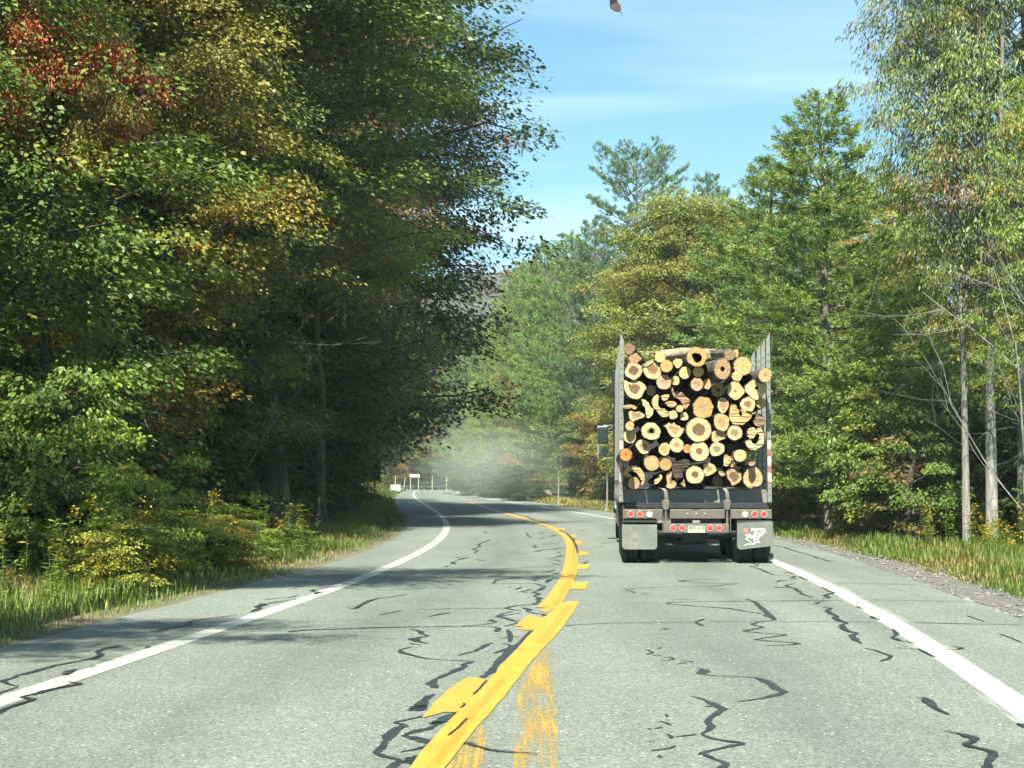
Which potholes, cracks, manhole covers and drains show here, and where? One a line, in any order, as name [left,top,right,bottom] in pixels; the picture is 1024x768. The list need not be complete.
crack [866,647,936,661]
crack [647,714,676,757]
crack [626,563,808,600]
crack [480,629,533,677]
